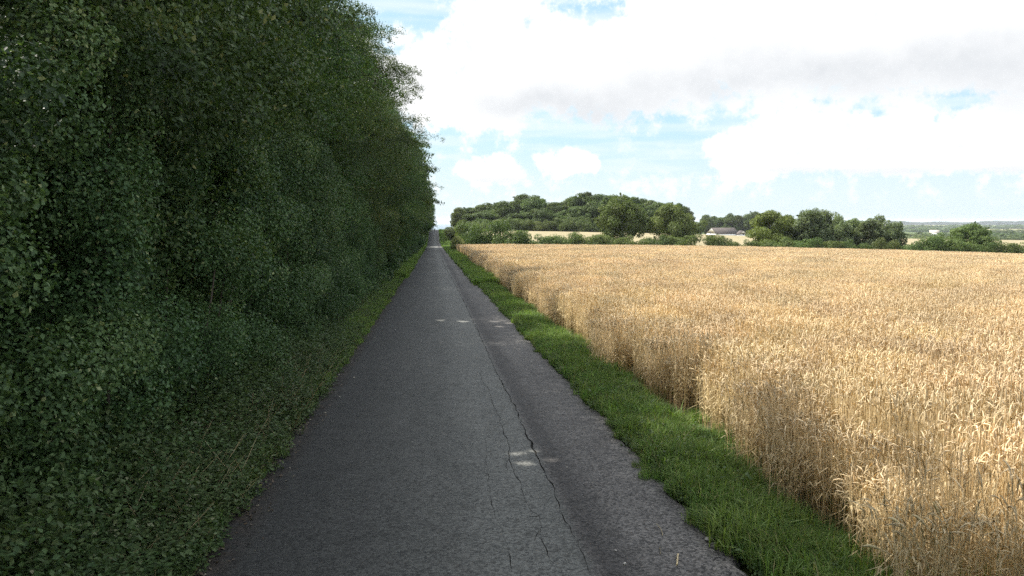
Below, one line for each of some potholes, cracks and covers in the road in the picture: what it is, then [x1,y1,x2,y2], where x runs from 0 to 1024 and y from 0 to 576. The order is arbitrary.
crack [480,371,553,566]
